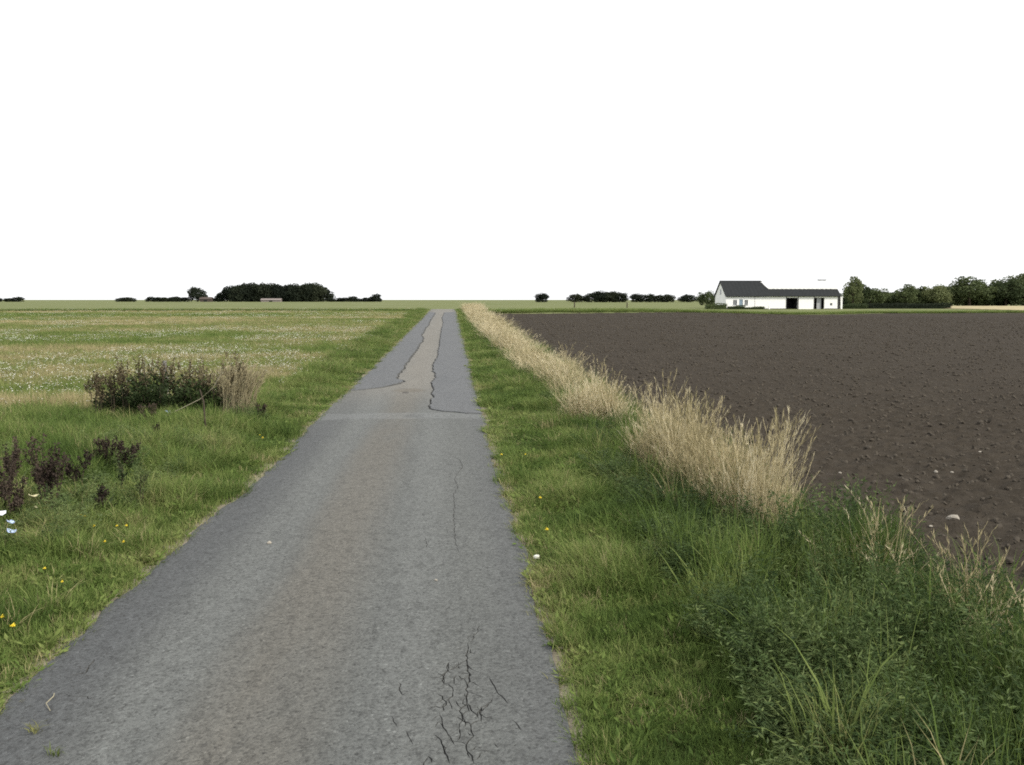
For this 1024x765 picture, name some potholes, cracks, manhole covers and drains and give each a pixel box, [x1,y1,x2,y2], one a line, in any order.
crack [392,626,522,765]
crack [453,452,463,559]
